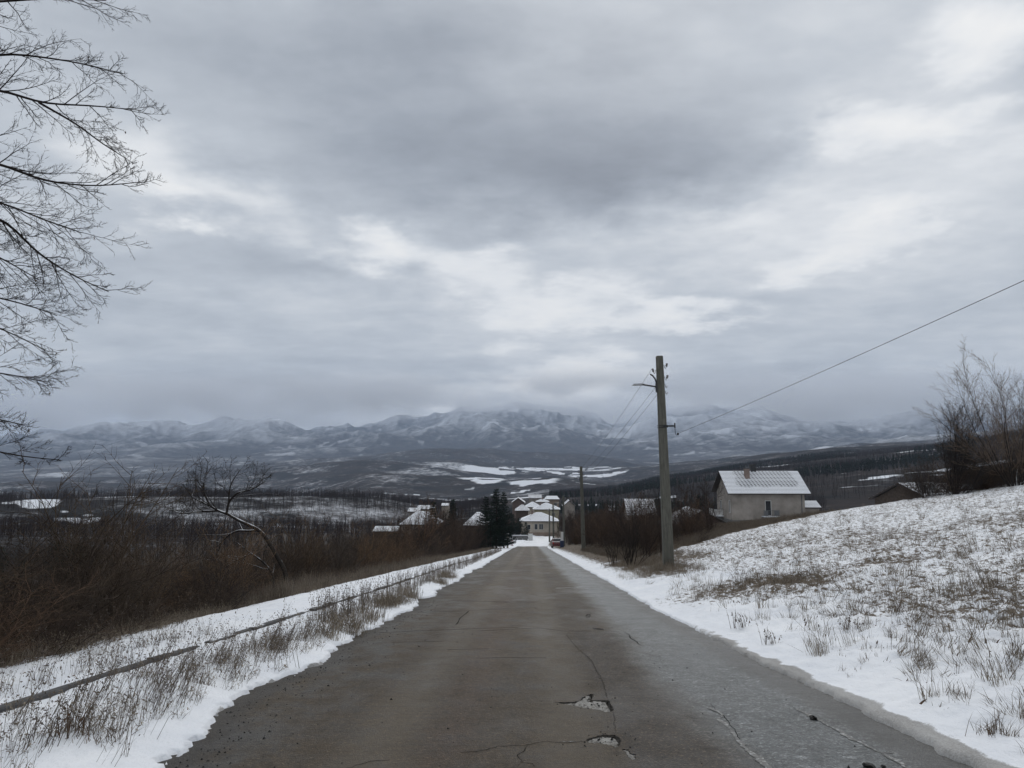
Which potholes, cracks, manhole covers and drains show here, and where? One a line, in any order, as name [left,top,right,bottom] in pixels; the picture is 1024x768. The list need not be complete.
crack [794,707,907,768]
pothole [586,735,622,747]
crack [461,741,581,764]
crack [708,706,772,768]
pothole [559,694,614,712]
